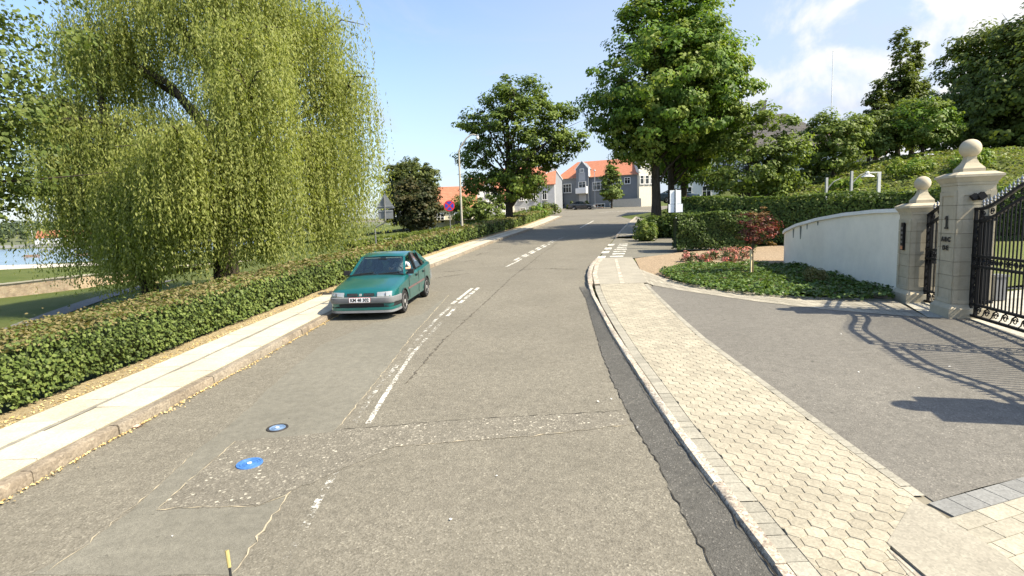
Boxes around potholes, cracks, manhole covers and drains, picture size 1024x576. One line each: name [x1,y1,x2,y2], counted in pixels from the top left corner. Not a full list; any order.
manhole cover [236,457,263,470]
manhole cover [266,423,289,432]
